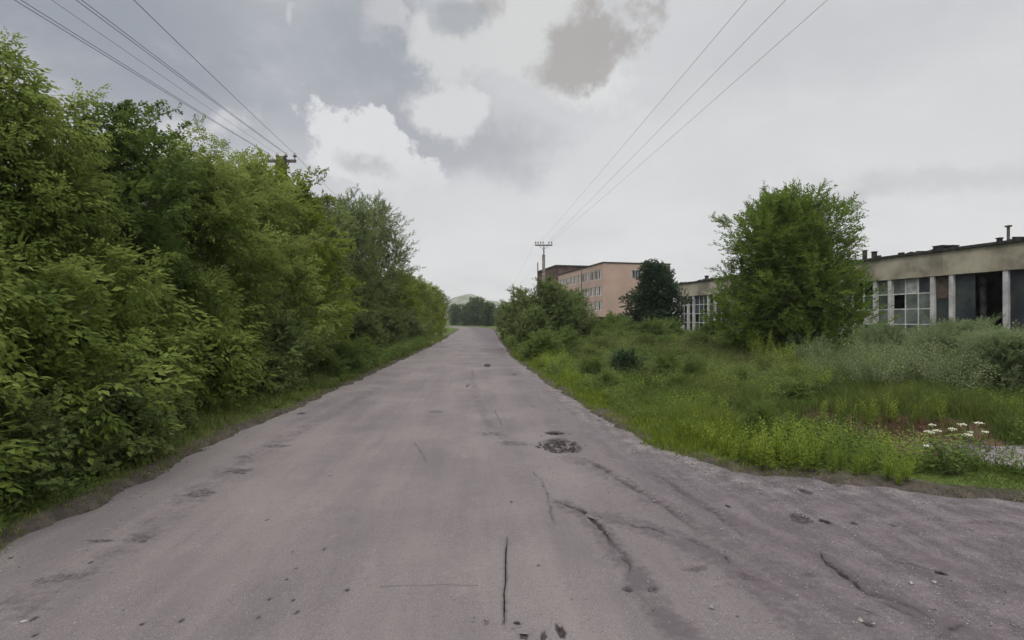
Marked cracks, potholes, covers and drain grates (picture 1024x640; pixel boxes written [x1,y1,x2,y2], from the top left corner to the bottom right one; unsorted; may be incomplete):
crack [375,536,537,634]
crack [529,470,676,573]
pothole [532,437,586,454]
crack [493,410,504,427]
pothole [783,511,820,526]
crack [411,442,430,463]
pothole [812,517,836,526]
